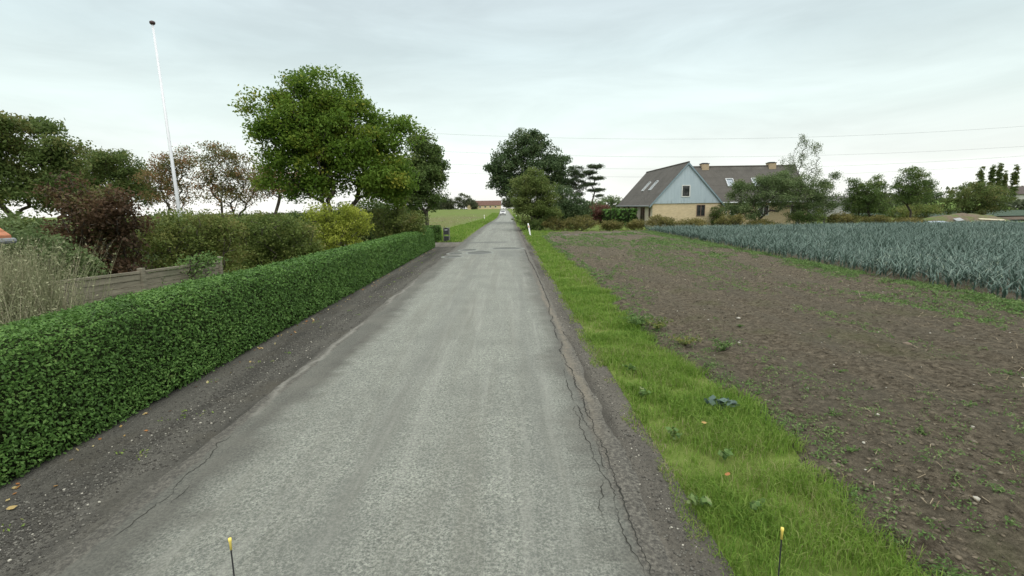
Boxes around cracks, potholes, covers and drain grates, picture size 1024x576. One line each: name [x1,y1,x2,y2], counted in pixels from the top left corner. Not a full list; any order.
crack [110,439,227,539]
crack [525,250,652,576]
